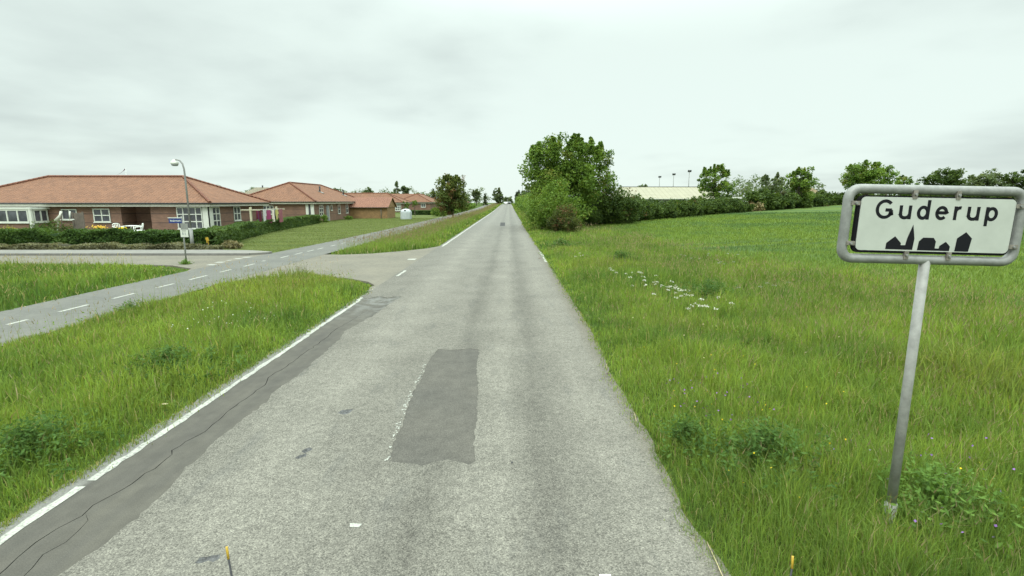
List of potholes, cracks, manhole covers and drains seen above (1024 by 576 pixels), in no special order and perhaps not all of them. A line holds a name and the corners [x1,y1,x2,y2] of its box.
crack [0,315,360,576]
